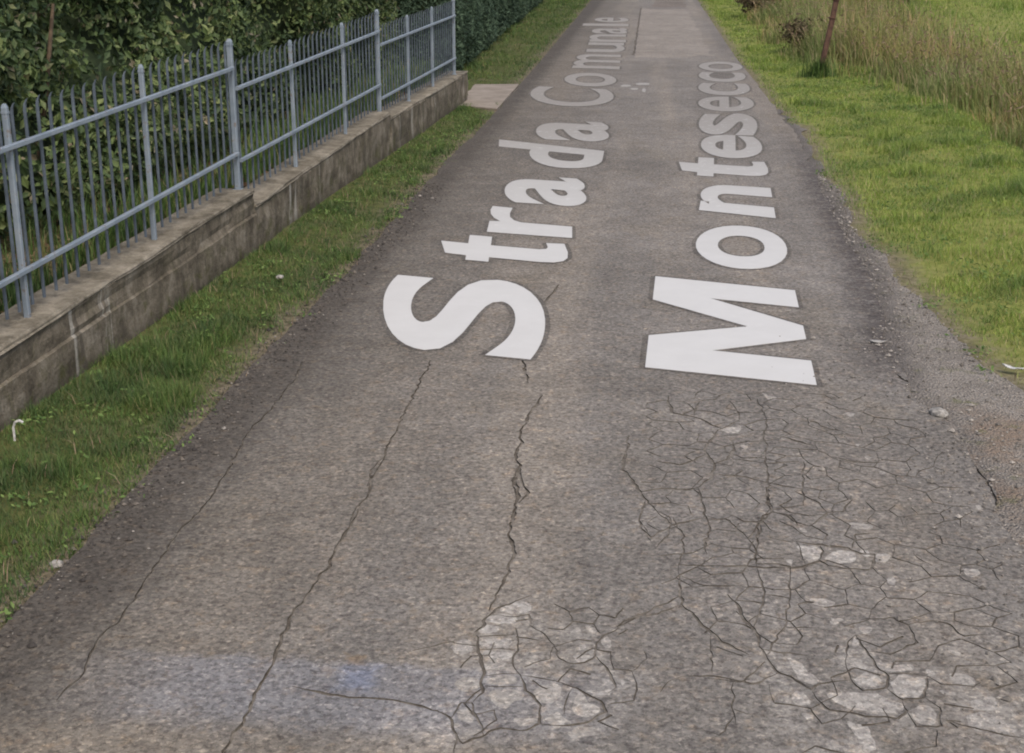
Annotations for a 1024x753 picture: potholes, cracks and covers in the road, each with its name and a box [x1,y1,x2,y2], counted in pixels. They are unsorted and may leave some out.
crack [59,360,1020,753]
